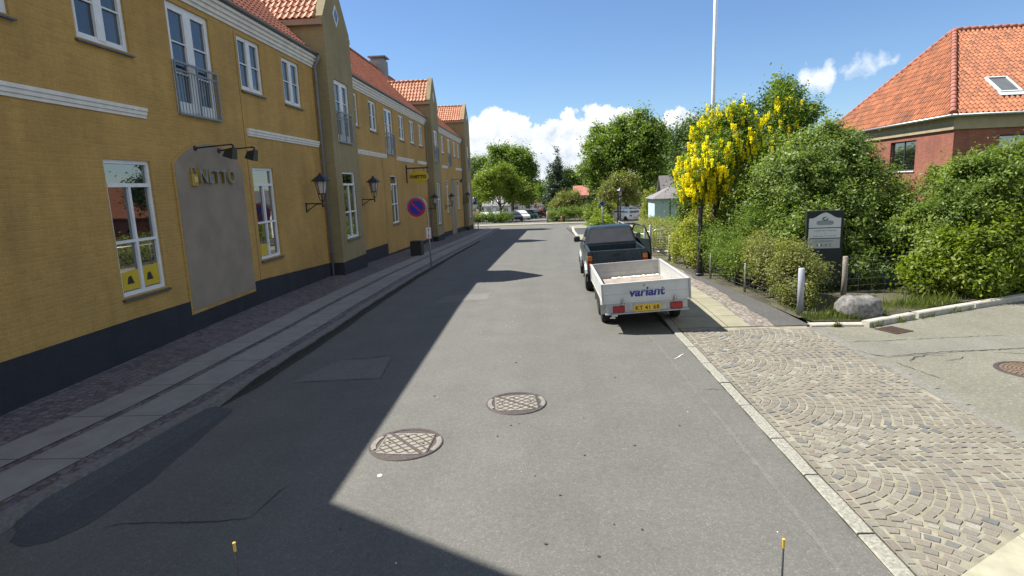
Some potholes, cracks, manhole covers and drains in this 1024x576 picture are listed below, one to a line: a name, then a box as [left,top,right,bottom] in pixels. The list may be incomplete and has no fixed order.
drain grate [875,326,913,334]
crack [99,486,288,529]
manhole cover [993,361,1024,378]
manhole cover [486,392,547,415]
manhole cover [369,428,443,461]
crack [854,335,1015,379]
